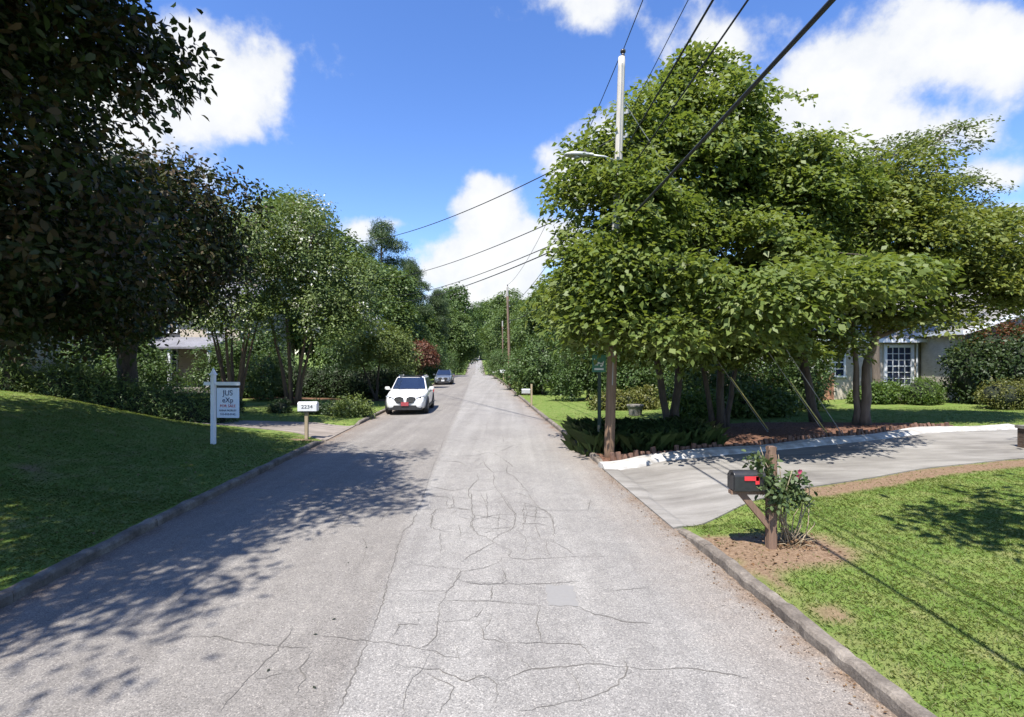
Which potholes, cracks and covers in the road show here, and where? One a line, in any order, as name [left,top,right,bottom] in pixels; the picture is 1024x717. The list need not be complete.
crack [325,439,747,712]
crack [192,628,309,712]
